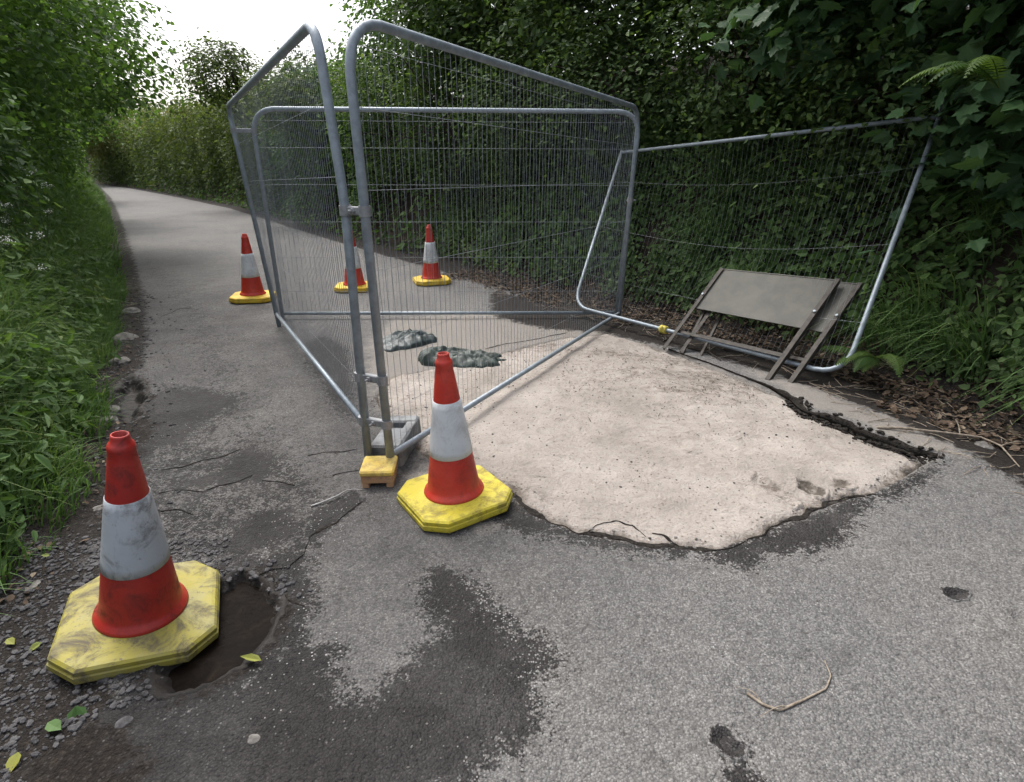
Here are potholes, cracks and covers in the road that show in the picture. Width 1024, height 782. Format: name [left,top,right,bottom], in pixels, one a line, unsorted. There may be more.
crack [512,492,876,552]
crack [157,449,295,515]
pothole [937,585,973,602]
pothole [144,566,288,701]
